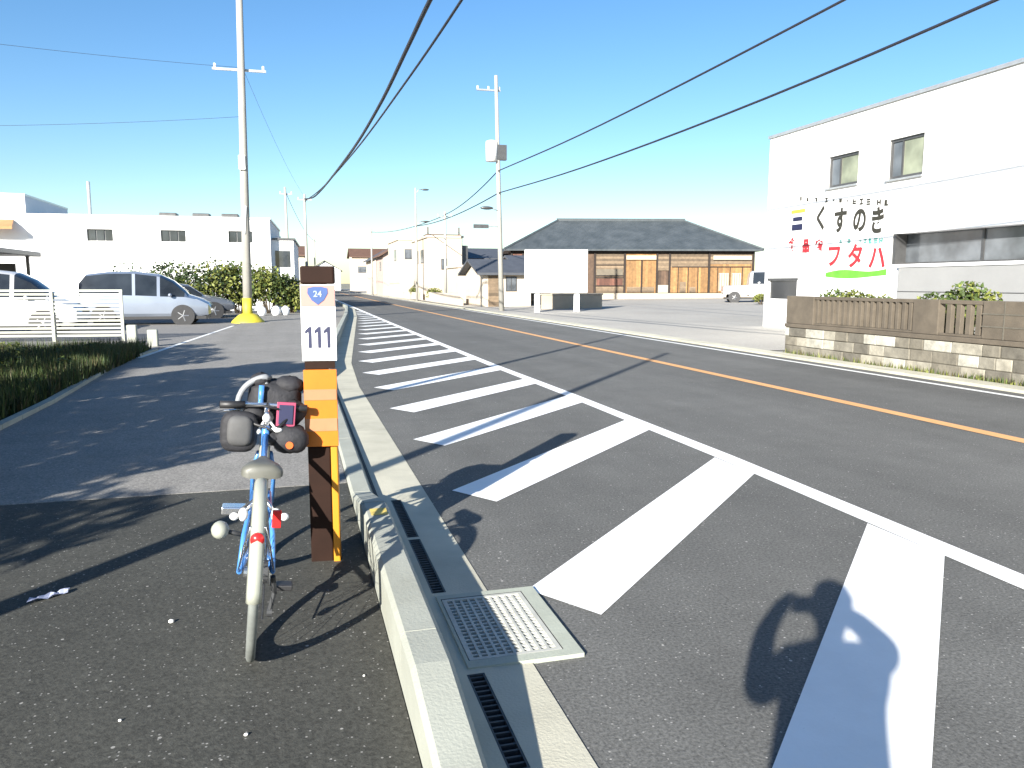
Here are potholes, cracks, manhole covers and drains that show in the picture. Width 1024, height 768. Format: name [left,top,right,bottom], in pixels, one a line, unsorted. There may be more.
drain grate [408,539,446,594]
drain grate [391,500,419,540]
drain grate [467,673,531,768]
